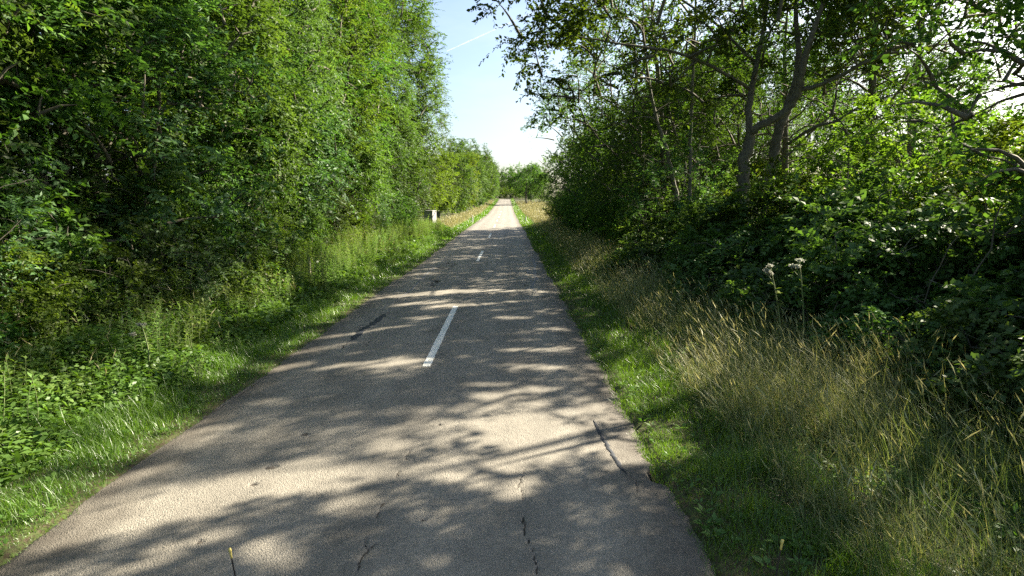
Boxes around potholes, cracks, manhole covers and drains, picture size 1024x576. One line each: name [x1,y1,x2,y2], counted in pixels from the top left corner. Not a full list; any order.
crack [358,452,411,570]
crack [518,470,538,574]
